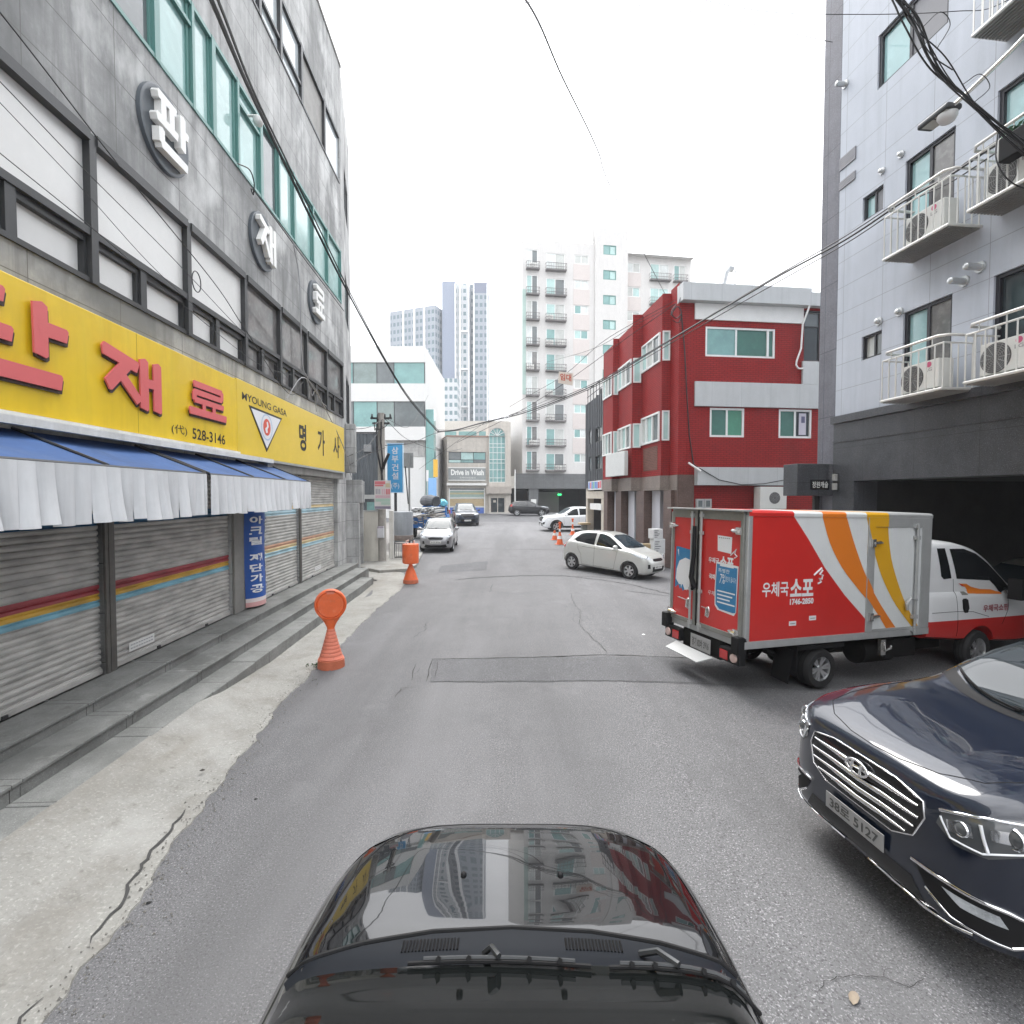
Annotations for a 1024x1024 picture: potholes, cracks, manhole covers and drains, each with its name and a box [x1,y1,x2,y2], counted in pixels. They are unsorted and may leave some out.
crack [395,593,716,697]
crack [819,968,923,990]
